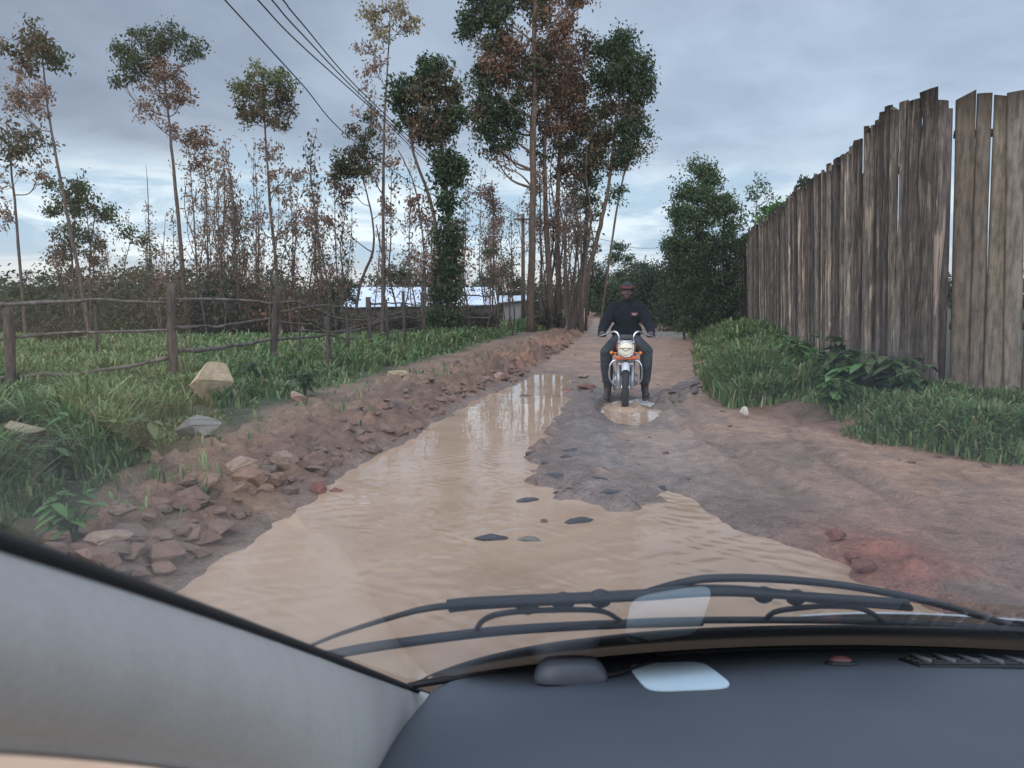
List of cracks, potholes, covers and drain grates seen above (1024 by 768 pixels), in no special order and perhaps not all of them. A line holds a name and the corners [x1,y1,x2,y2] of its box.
pothole [0,372,1012,768]
